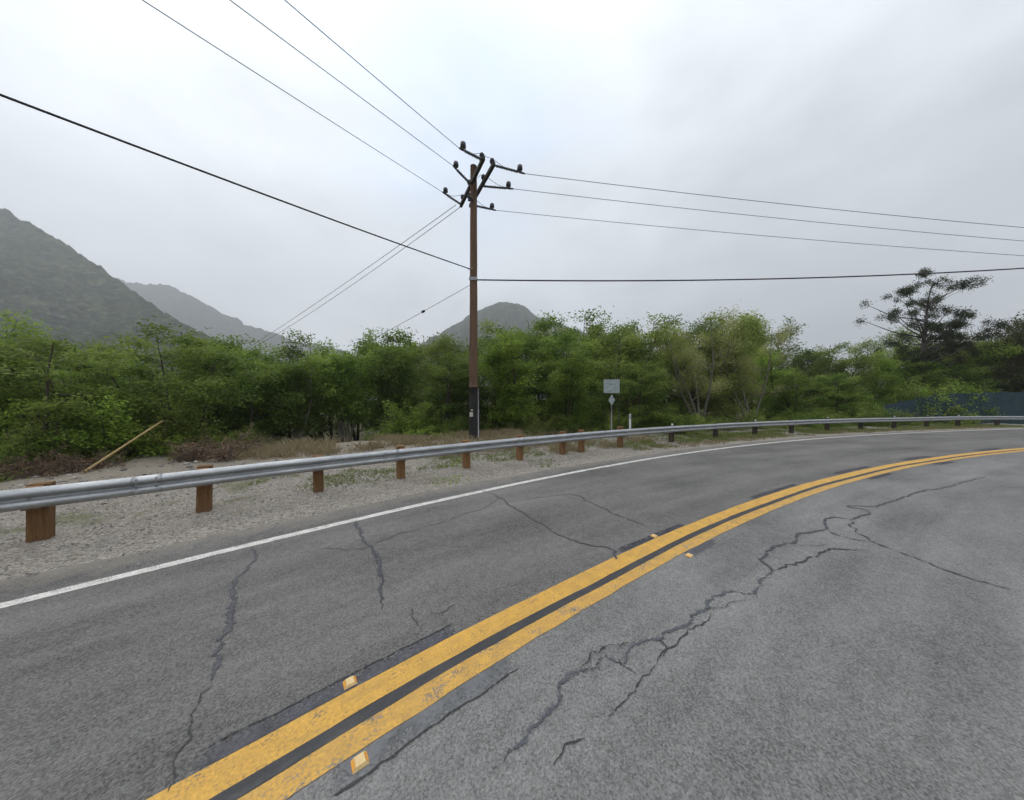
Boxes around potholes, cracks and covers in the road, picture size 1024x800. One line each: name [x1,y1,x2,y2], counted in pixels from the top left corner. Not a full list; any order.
crack [485,476,1020,779]
